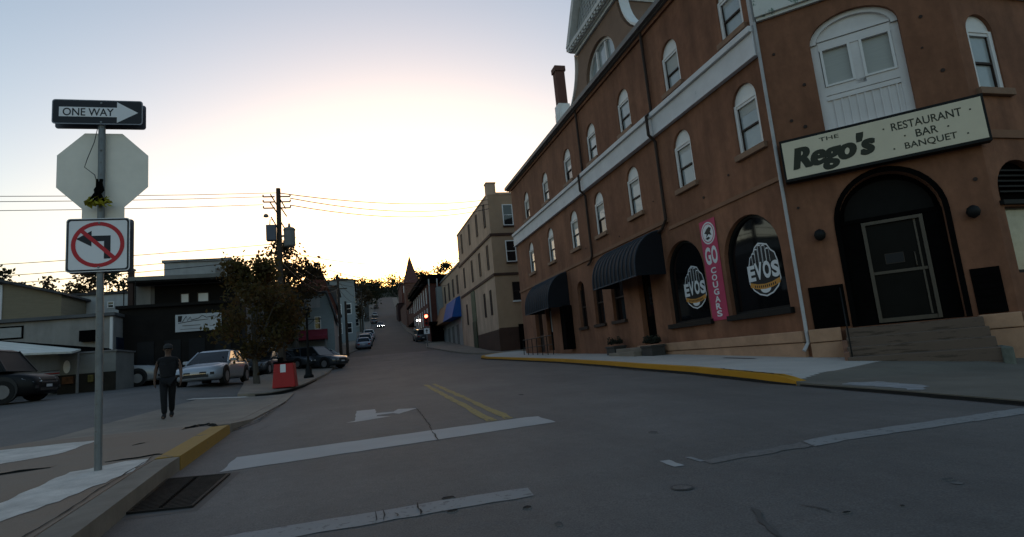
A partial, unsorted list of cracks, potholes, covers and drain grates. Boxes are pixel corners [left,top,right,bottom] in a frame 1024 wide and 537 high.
crack [181,423,267,434]
drain grate [126,473,230,515]
